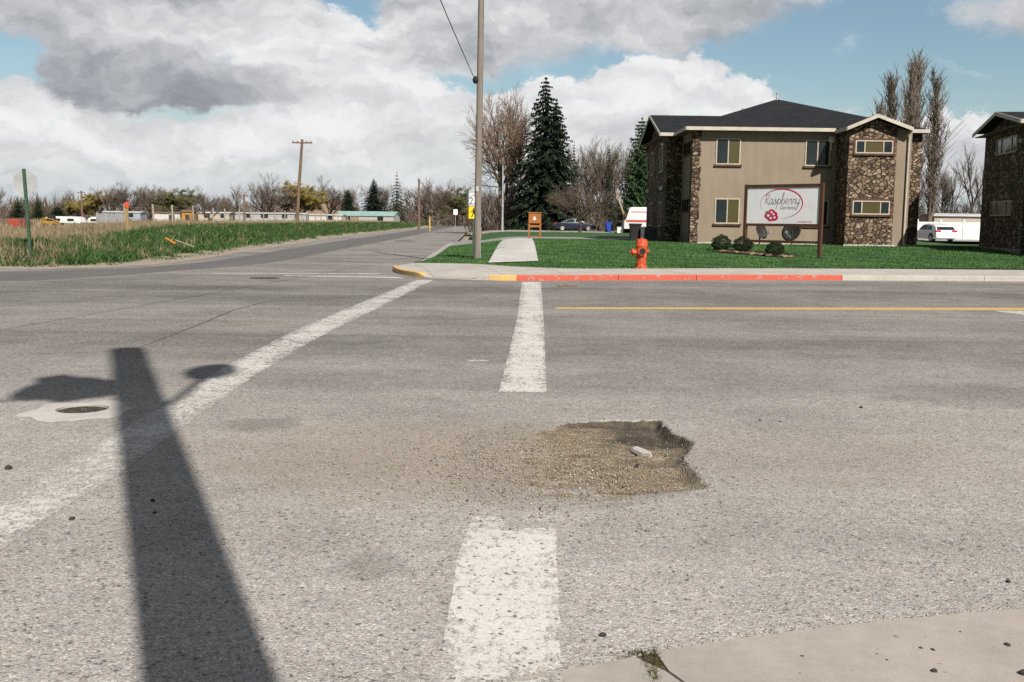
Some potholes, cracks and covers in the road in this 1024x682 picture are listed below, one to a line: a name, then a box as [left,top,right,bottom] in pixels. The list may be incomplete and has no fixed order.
manhole cover [15,400,134,423]
pothole [445,419,717,513]
